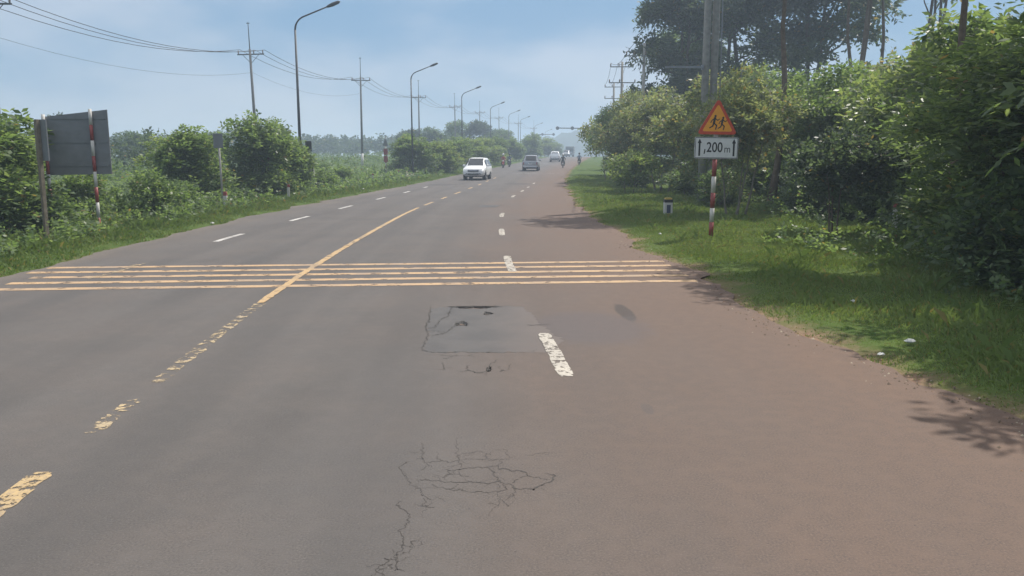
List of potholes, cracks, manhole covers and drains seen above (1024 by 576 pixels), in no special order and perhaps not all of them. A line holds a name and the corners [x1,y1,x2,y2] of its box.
crack [422,305,543,374]
crack [367,440,556,576]
